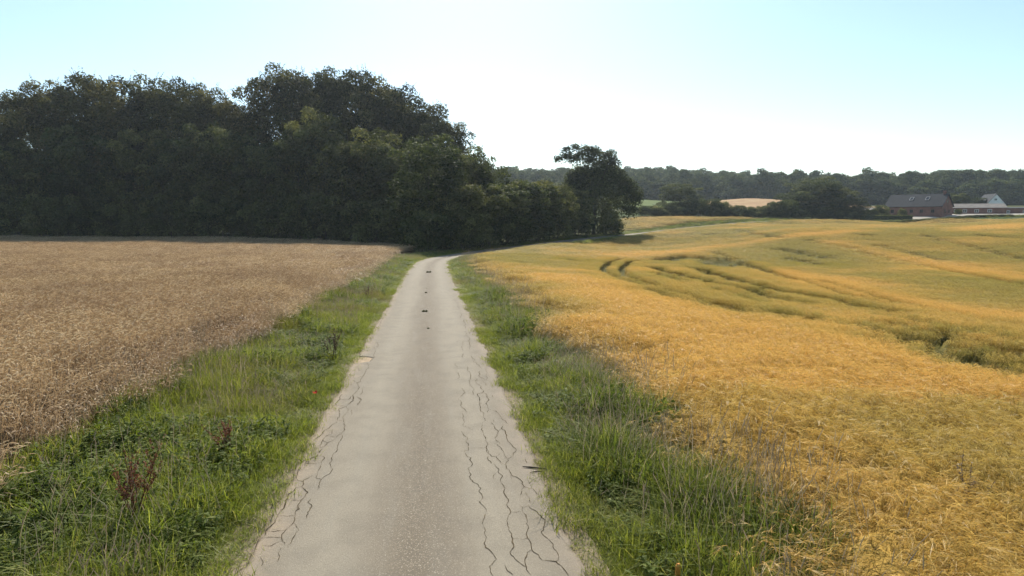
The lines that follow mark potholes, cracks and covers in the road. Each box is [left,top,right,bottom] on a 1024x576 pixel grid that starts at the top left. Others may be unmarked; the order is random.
crack [246,365,369,571]
crack [458,356,569,576]
